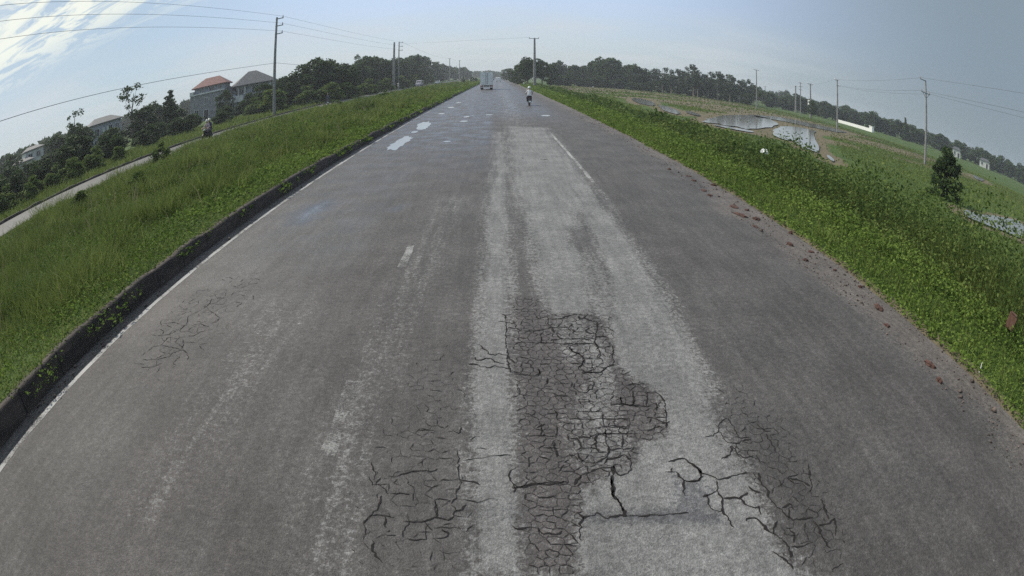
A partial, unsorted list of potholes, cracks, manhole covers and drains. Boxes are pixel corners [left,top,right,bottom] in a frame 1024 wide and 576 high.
crack [352,297,846,575]
crack [137,273,259,381]
